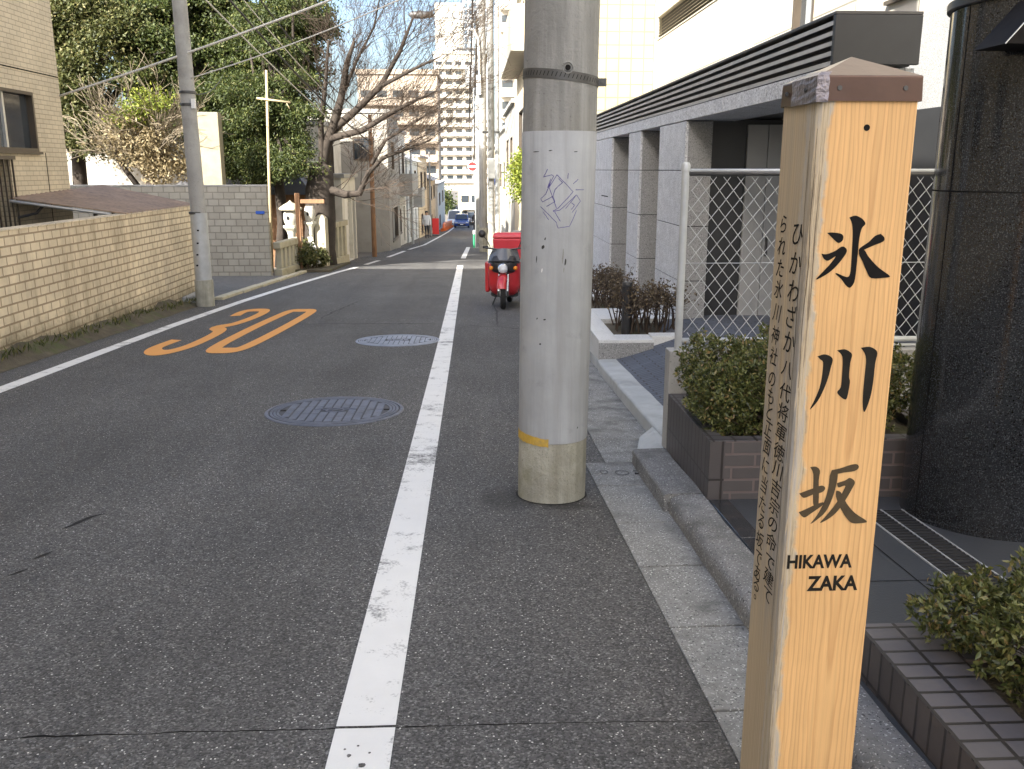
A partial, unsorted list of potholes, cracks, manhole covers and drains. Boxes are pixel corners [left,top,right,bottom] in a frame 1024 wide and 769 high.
drain grate [876,509,1024,616]
manhole cover [355,334,440,346]
manhole cover [264,396,404,427]
